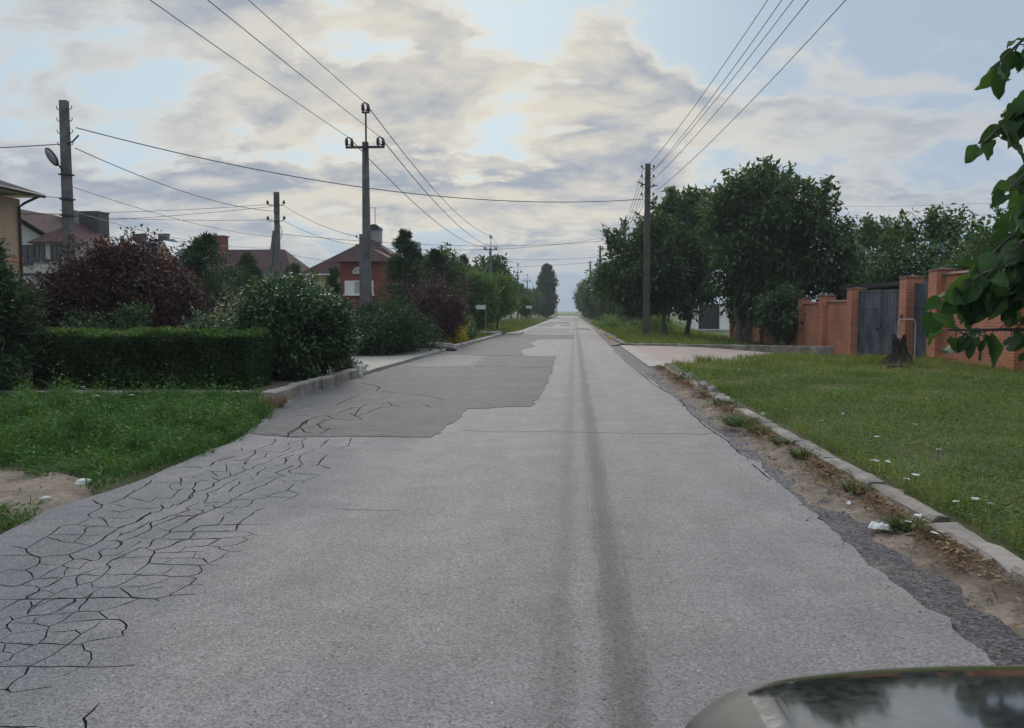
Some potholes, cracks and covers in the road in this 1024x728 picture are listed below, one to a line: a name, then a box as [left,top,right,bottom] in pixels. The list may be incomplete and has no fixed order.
crack [0,420,352,728]
crack [286,383,443,436]
